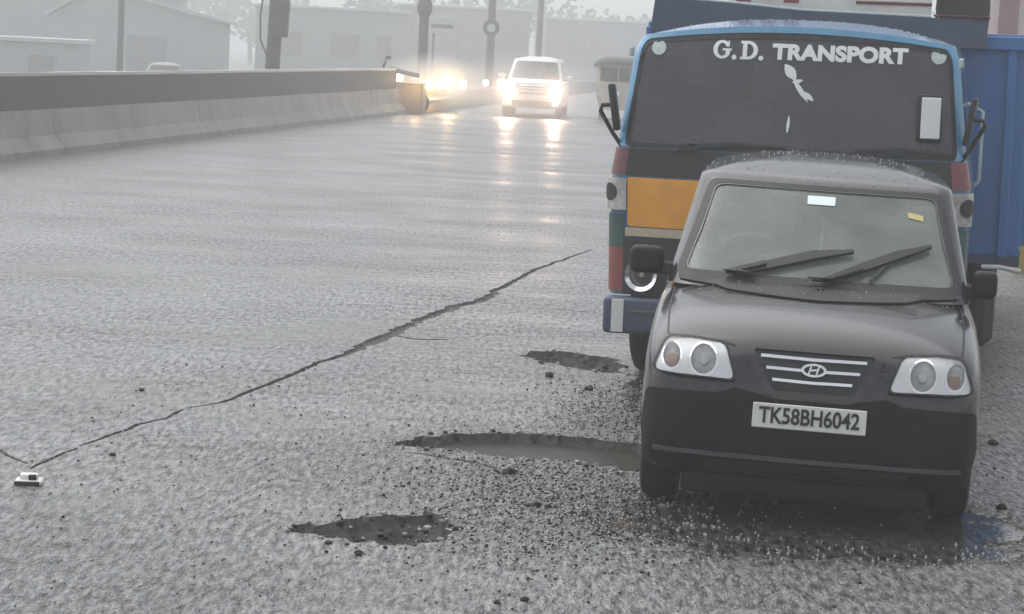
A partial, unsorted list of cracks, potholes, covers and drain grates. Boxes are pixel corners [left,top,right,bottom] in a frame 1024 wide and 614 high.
crack [0,250,590,470]
pothole [394,432,641,471]
pothole [286,510,456,547]
pothole [517,351,625,373]
